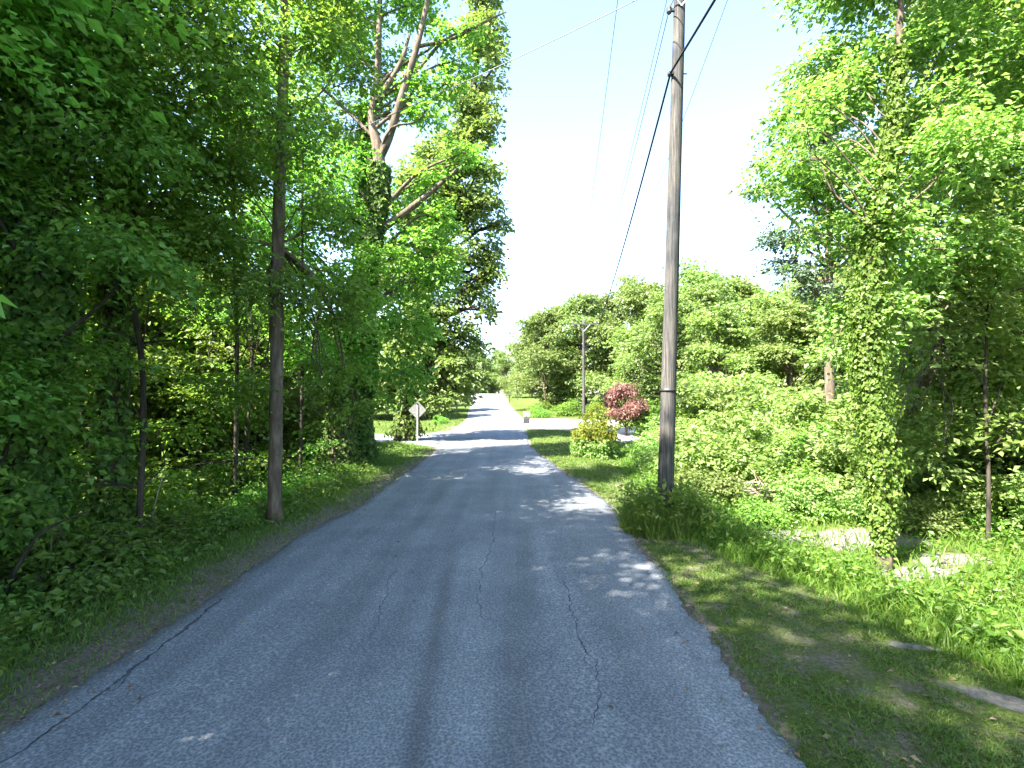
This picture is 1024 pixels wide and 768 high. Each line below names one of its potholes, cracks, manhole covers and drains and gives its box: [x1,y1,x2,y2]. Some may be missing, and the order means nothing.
crack [564,582,602,727]
crack [0,598,222,762]
crack [476,511,496,621]
crack [369,563,404,641]
